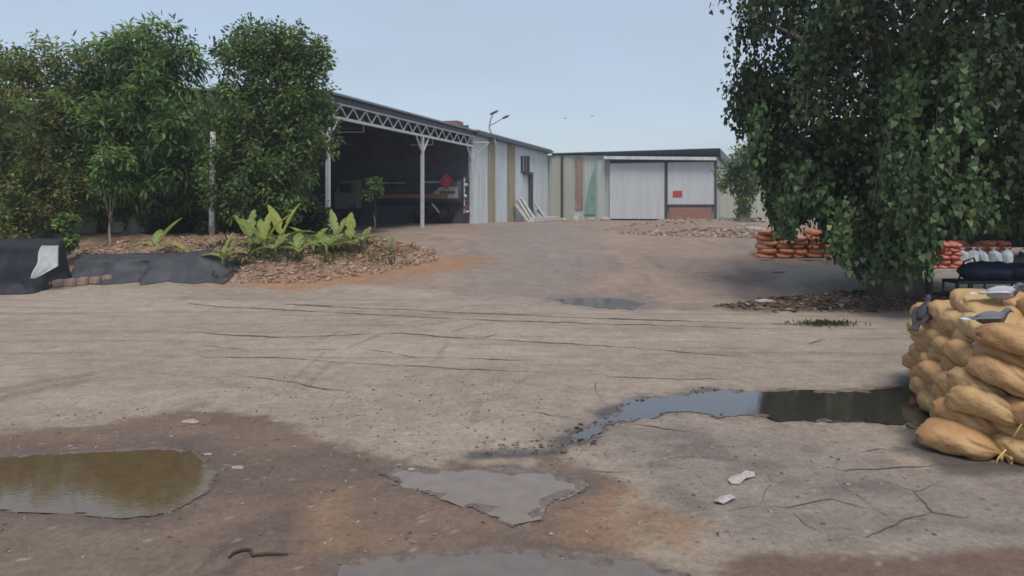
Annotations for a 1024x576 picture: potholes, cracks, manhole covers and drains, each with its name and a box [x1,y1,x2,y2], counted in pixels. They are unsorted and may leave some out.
crack [726,475,976,537]
pothole [570,383,930,444]
crack [819,448,1024,471]
crack [244,375,352,392]
pothole [0,446,219,519]
crack [190,303,803,373]
pothole [554,297,643,310]
pothole [337,545,691,576]
pothole [375,464,589,527]
